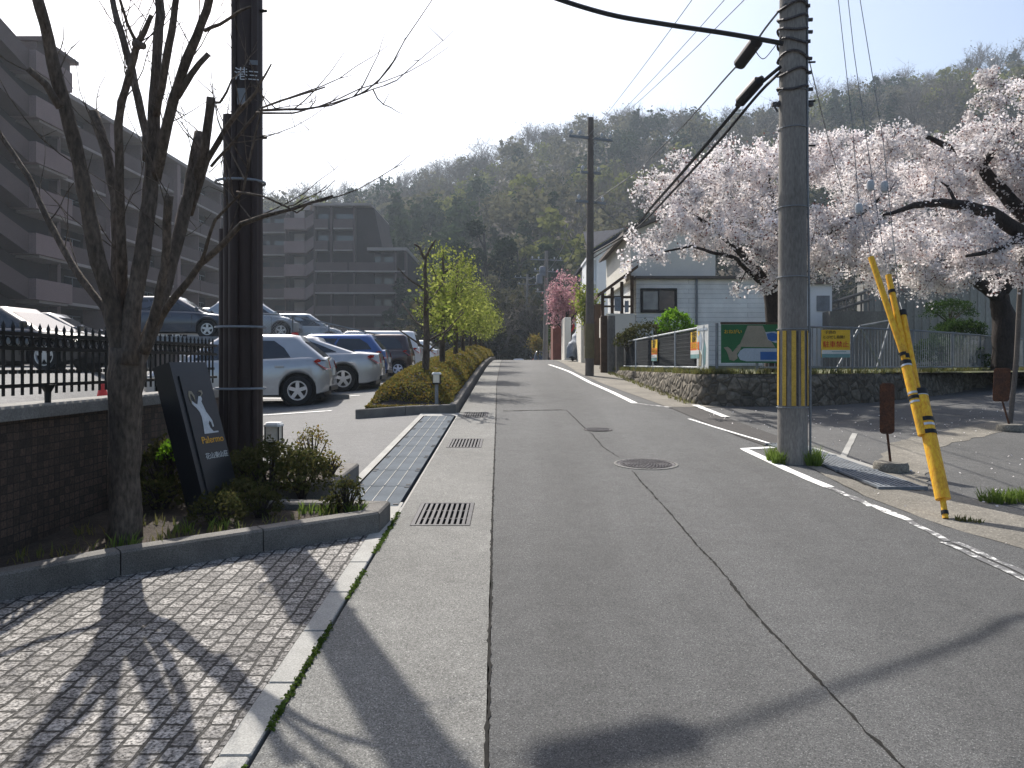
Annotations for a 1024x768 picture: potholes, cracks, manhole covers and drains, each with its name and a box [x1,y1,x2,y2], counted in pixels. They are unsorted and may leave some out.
drain grate [410,502,474,526]
drain grate [765,443,928,490]
manhole cover [614,458,679,470]
crack [514,409,905,768]
drain grate [446,438,483,448]
